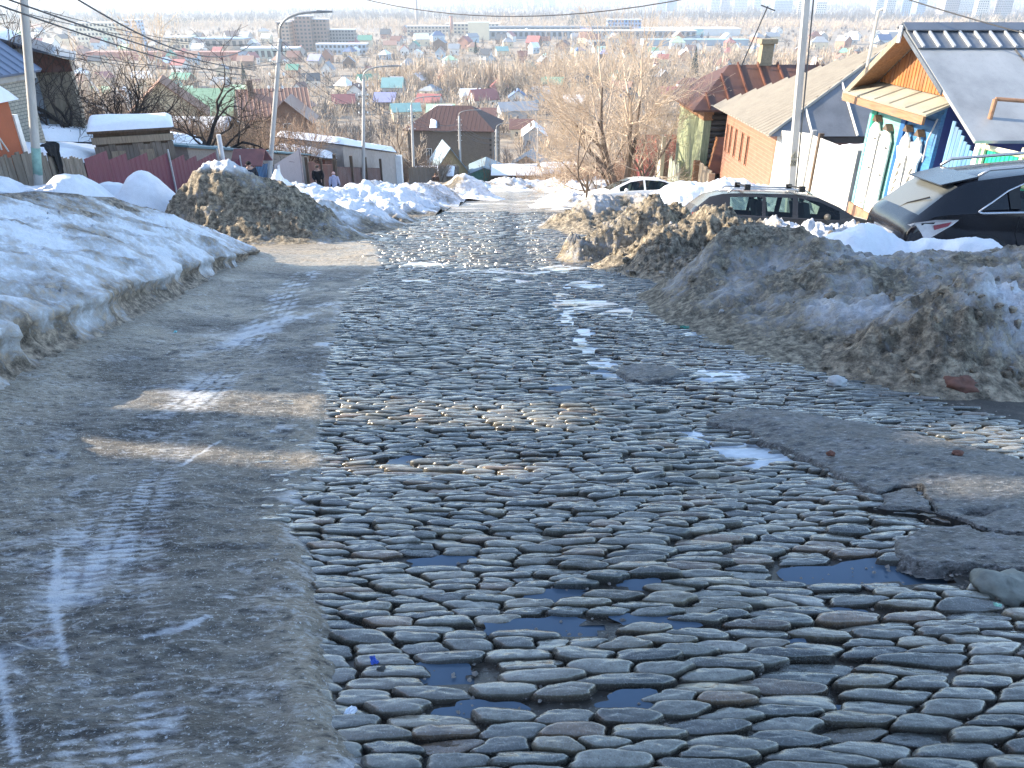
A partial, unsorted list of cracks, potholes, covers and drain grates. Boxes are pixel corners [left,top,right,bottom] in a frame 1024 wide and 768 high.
pothole [593,688,658,709]
pothole [416,662,497,686]
crack [867,487,989,532]
pothole [405,555,477,567]
pothole [772,558,970,585]
pothole [481,616,623,640]
